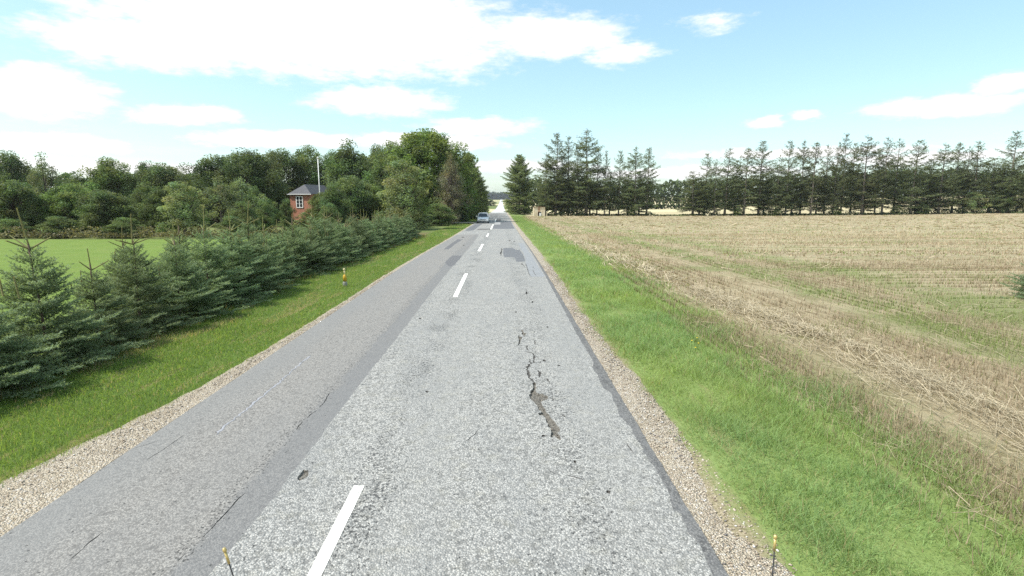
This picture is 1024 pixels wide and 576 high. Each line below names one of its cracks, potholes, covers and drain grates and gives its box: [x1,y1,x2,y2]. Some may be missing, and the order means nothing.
crack [215,355,329,435]
crack [203,493,245,537]
crack [514,329,565,417]
